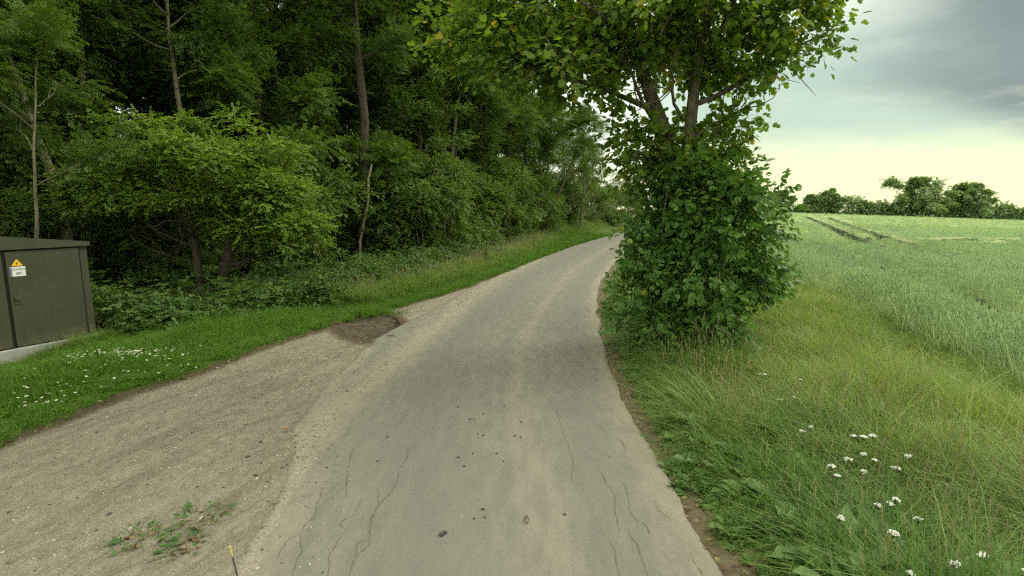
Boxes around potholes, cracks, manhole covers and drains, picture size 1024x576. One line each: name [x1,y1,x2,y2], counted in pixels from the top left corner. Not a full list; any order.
crack [600,443,704,576]
crack [328,446,409,575]
pothole [331,313,402,340]
